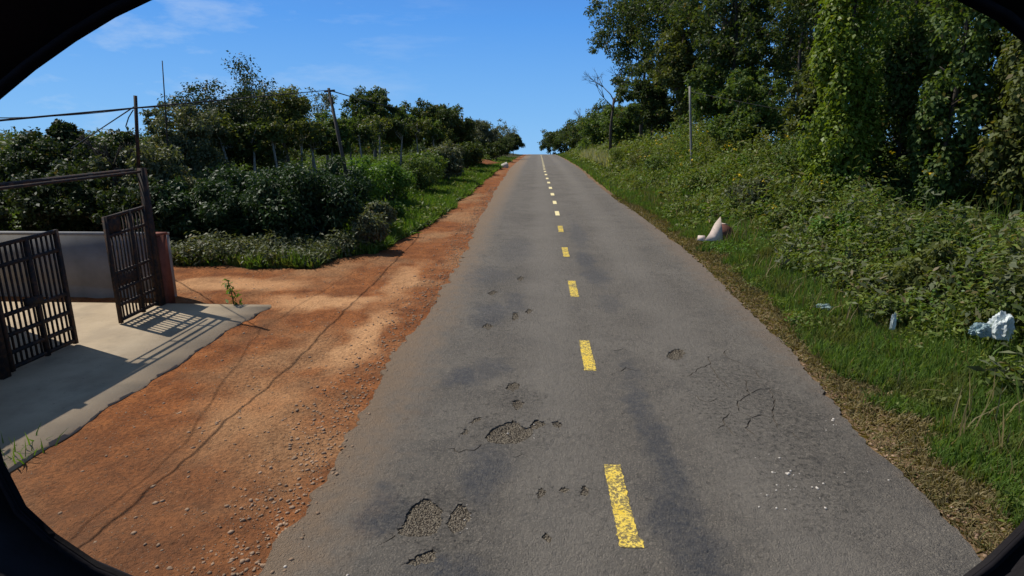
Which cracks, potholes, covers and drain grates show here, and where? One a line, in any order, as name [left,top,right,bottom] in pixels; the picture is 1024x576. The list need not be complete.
crack [691,350,799,439]
pothole [667,349,686,361]
pothole [445,504,472,533]
pothole [404,549,437,566]
pothole [485,420,546,444]
pothole [397,498,443,537]
